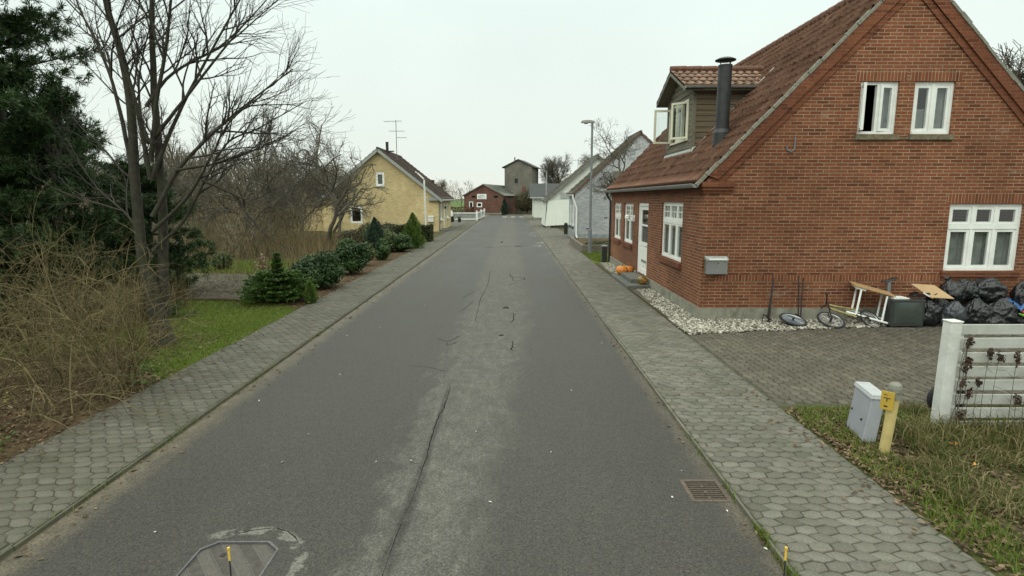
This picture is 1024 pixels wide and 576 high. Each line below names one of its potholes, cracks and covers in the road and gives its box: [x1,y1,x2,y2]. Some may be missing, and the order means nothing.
drain grate [679,479,733,502]
manhole cover [176,541,279,576]
